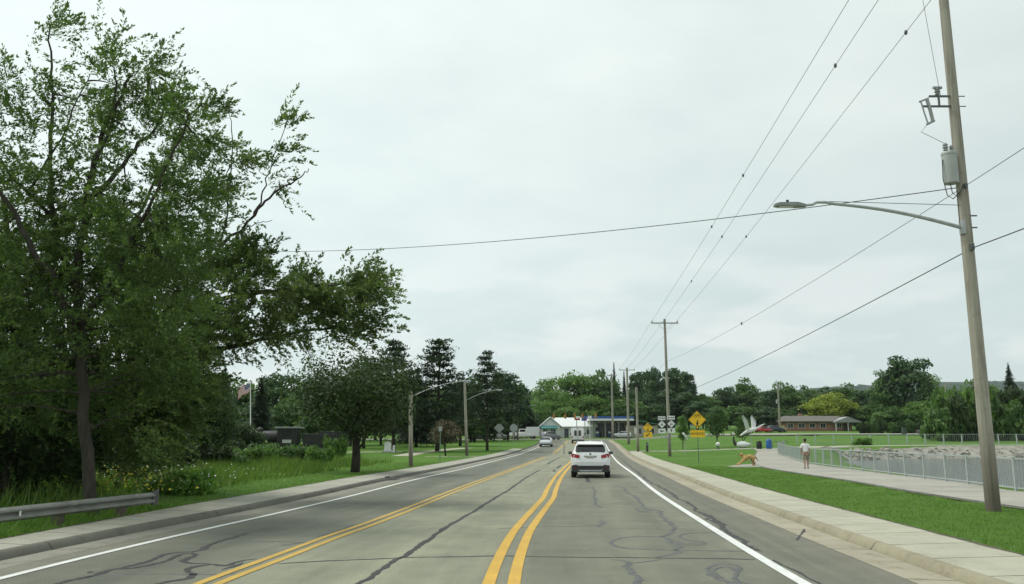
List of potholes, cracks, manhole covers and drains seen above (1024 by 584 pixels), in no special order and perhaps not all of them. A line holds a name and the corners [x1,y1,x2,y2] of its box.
crack [218,456,822,584]
